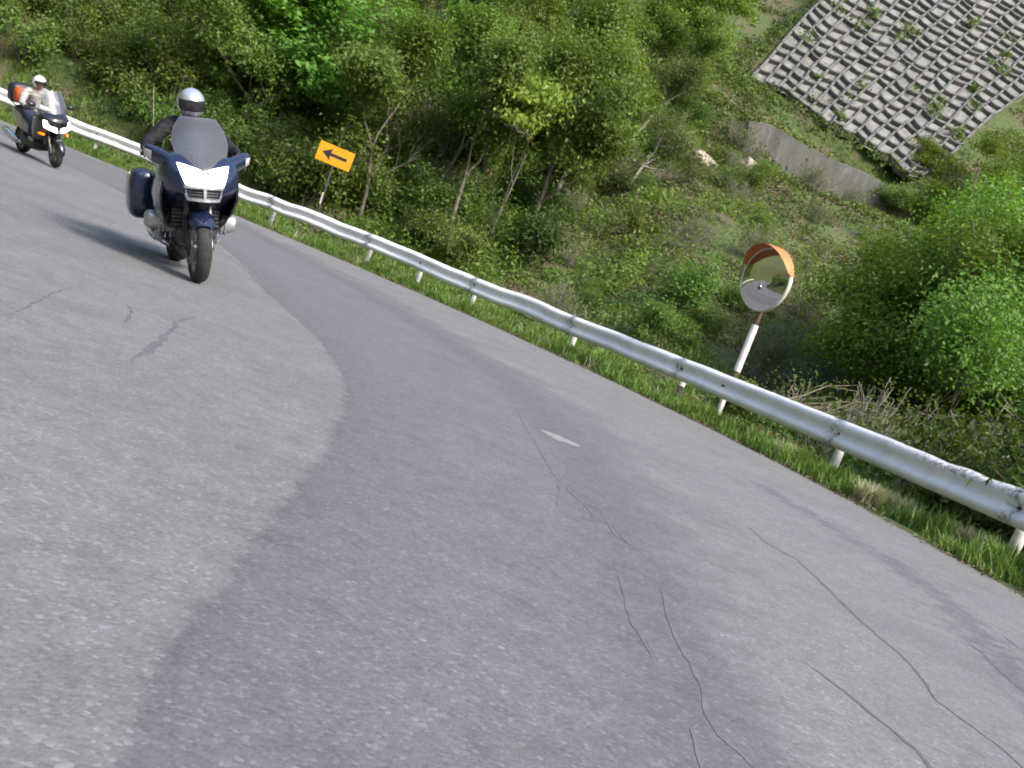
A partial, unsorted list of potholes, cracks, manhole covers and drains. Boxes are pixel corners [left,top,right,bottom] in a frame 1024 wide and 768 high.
crack [618,577,755,768]
crack [124,304,197,361]
crack [3,287,72,315]
crack [515,408,640,552]
crack [750,528,1023,768]
